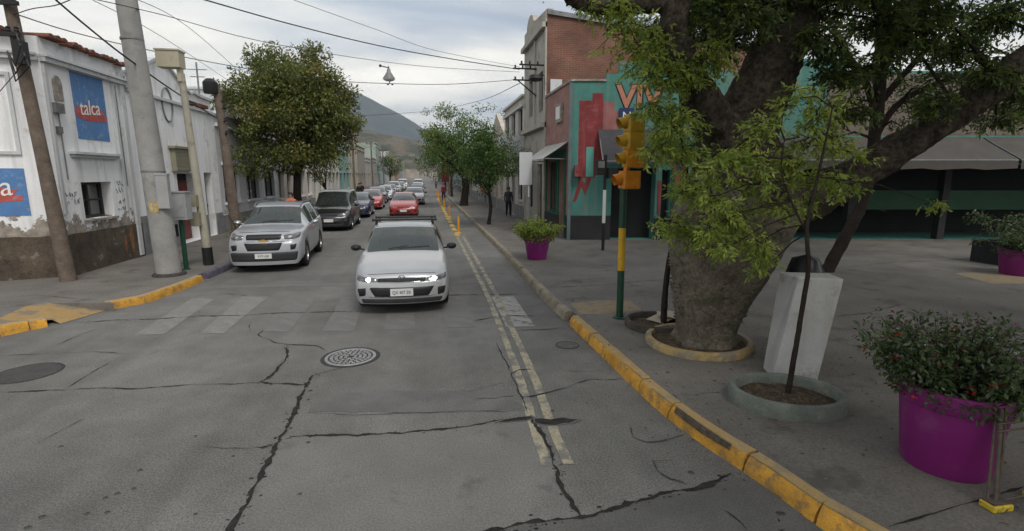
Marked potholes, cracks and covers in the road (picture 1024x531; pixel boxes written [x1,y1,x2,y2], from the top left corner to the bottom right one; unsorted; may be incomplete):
crack [630,408,731,484]
manhole cover [556,341,579,349]
crack [216,369,620,448]
manhole cover [320,347,380,368]
manhole cover [0,362,65,384]
crack [13,311,345,393]
